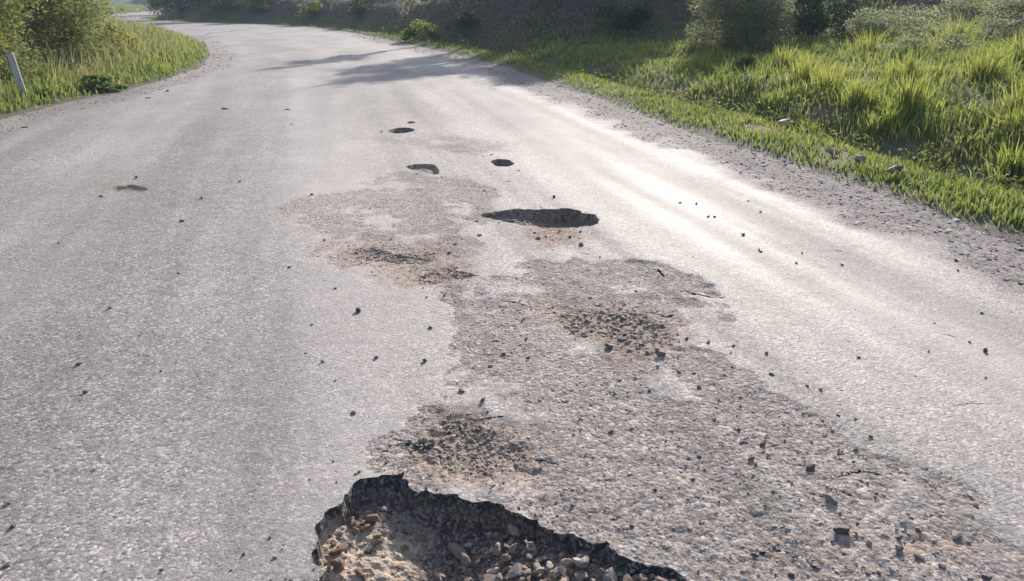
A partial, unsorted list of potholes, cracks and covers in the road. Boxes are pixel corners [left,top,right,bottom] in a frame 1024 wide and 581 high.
crack [838,470,892,500]
pothole [405,164,440,175]
pothole [553,309,680,358]
pothole [351,247,447,265]
pothole [394,414,537,485]
pothole [407,266,479,285]
pothole [490,159,514,167]
pothole [480,208,600,228]
pothole [105,185,148,193]
pothole [311,472,688,581]
